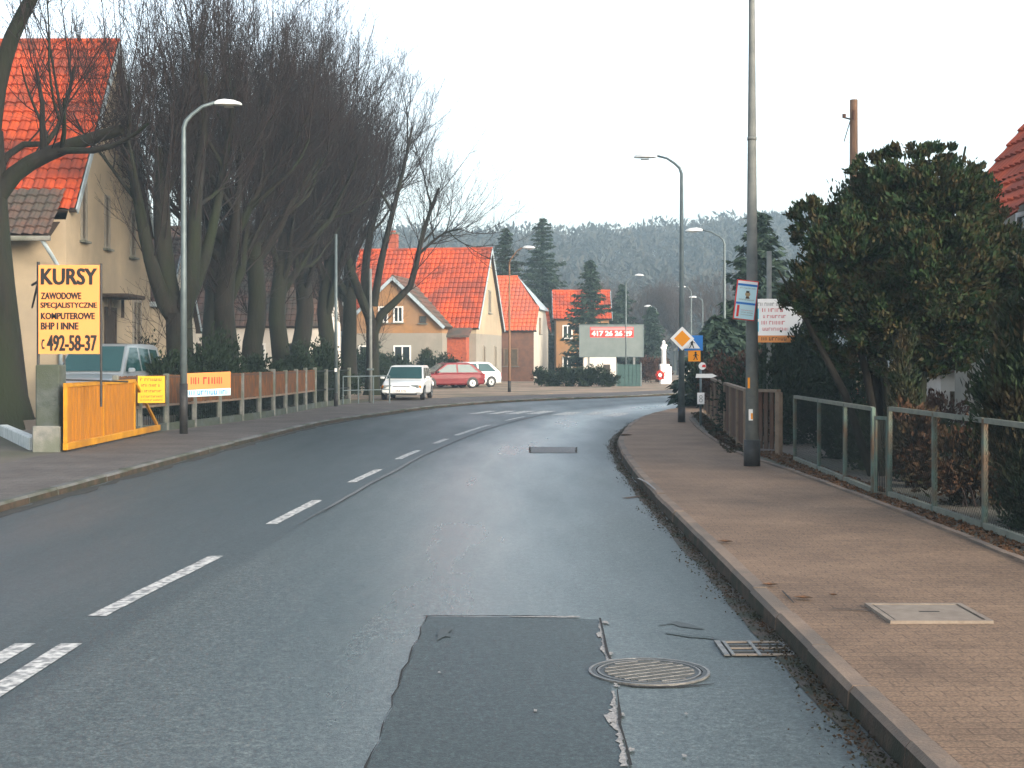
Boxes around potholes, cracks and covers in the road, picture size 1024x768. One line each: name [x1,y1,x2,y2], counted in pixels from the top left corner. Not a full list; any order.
drain grate [714,640,796,656]
utility cover [864,603,994,624]
manhole cover [589,658,710,686]
